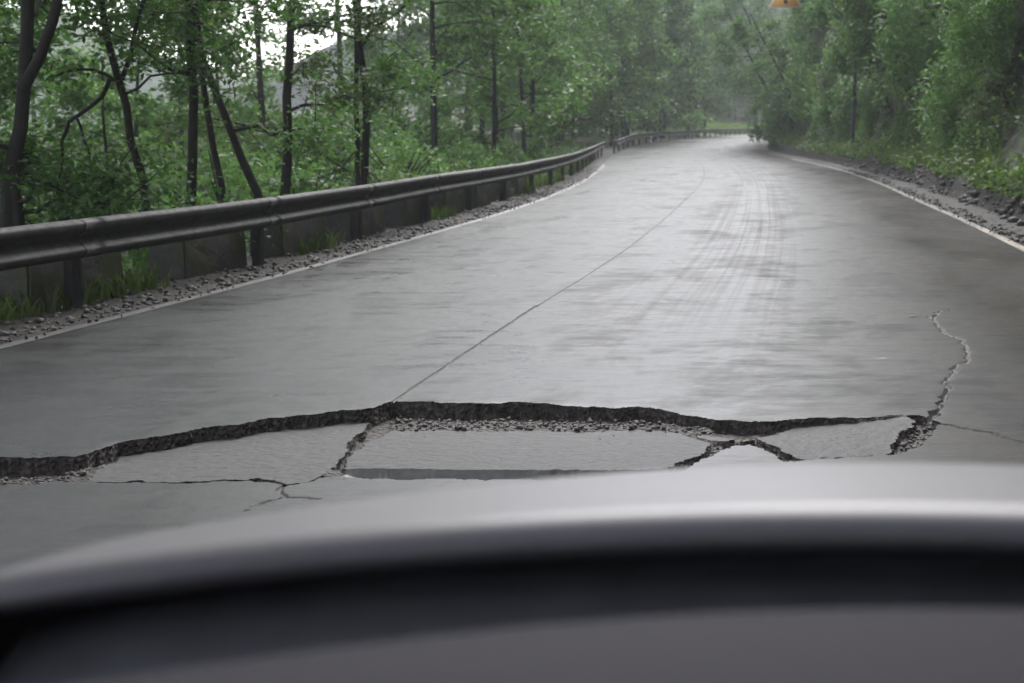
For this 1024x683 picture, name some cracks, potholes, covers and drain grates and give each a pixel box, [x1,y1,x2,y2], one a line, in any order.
crack [242,485,323,512]
pothole [0,401,941,488]
crack [910,310,1024,443]
